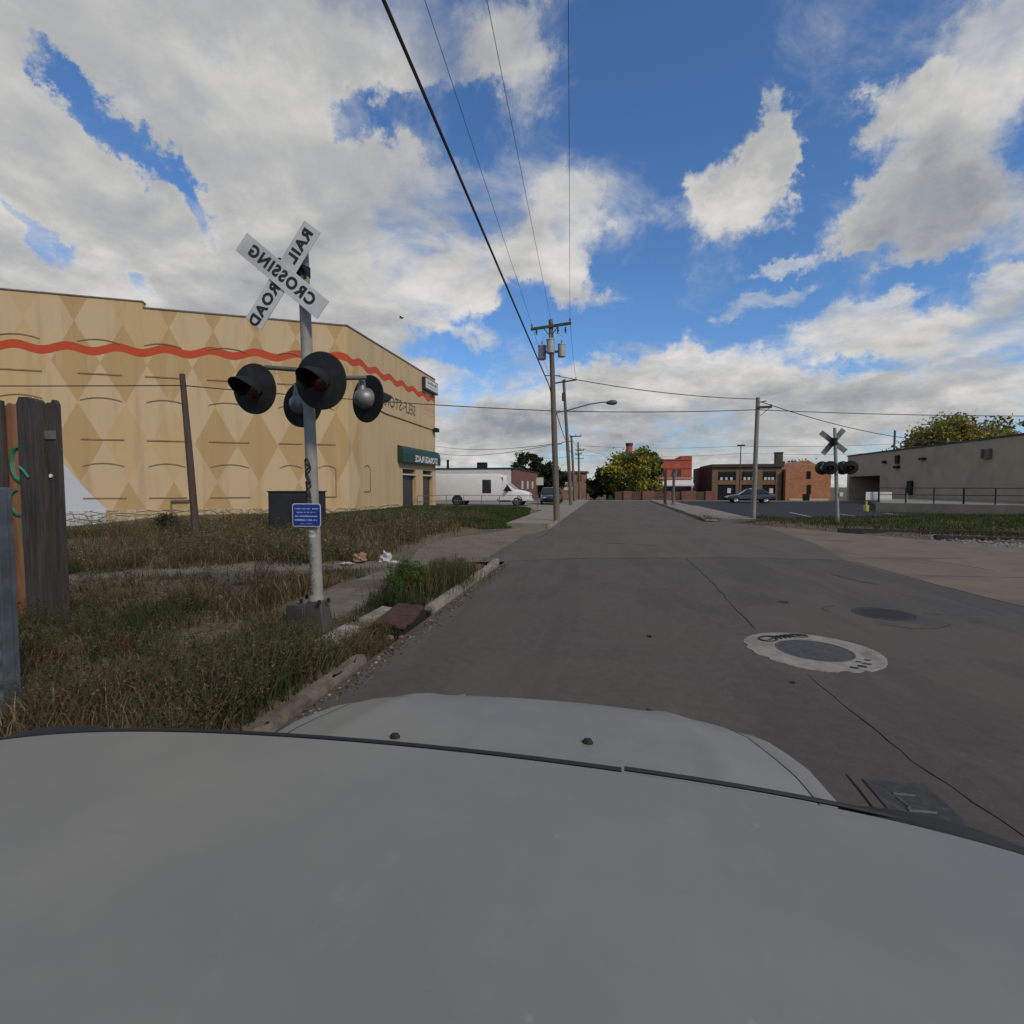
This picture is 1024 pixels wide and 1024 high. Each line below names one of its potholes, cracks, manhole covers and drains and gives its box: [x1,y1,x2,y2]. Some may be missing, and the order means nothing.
manhole cover [851,607,920,621]
utility cover [862,778,971,827]
crack [846,774,873,807]
manhole cover [743,632,888,673]
